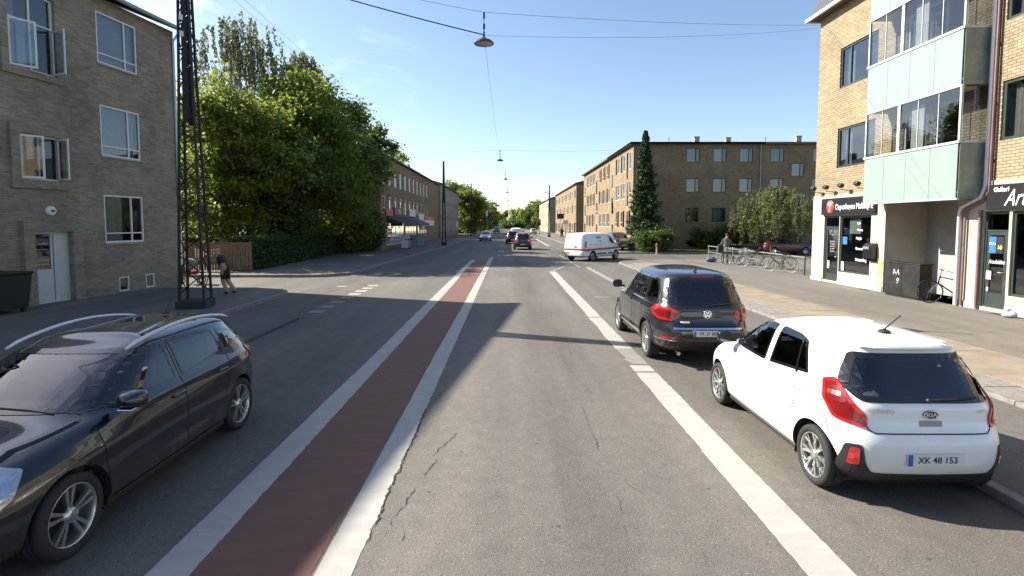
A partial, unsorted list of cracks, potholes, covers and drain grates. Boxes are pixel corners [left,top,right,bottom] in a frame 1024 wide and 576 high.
crack [366,409,457,544]
